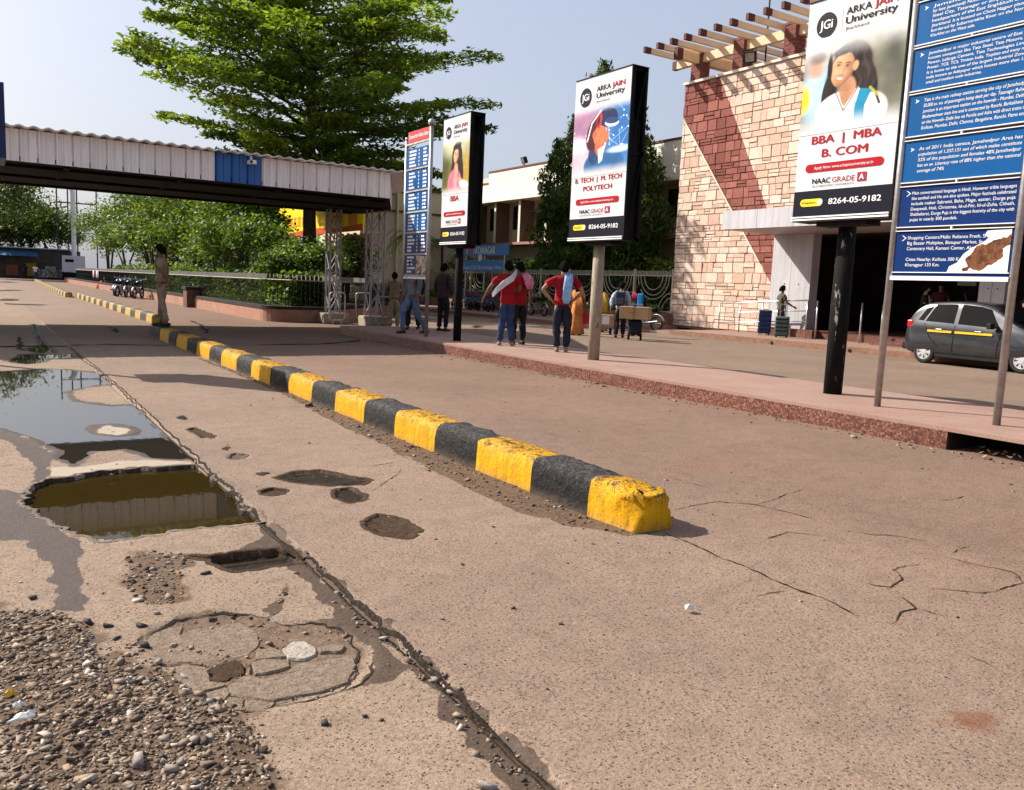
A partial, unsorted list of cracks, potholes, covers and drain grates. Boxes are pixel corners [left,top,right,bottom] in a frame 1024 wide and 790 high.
pothole [16,464,266,543]
crack [667,533,855,615]
crack [935,546,1024,593]
crack [867,564,939,624]
pothole [330,487,369,504]
pothole [257,487,290,496]
pothole [185,427,217,439]
pothole [359,513,424,540]
pothole [271,469,375,487]
pothole [184,546,307,572]
crack [677,479,811,539]
